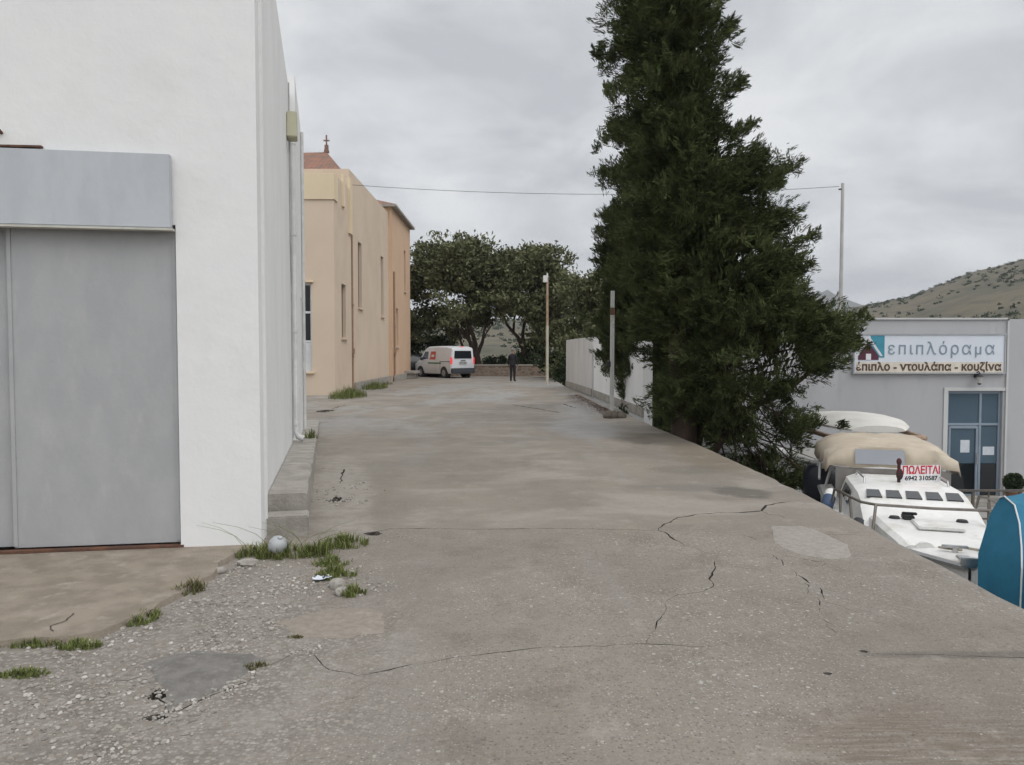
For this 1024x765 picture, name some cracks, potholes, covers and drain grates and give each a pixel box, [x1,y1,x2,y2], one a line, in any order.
crack [744,535,855,631]
crack [261,561,716,676]
